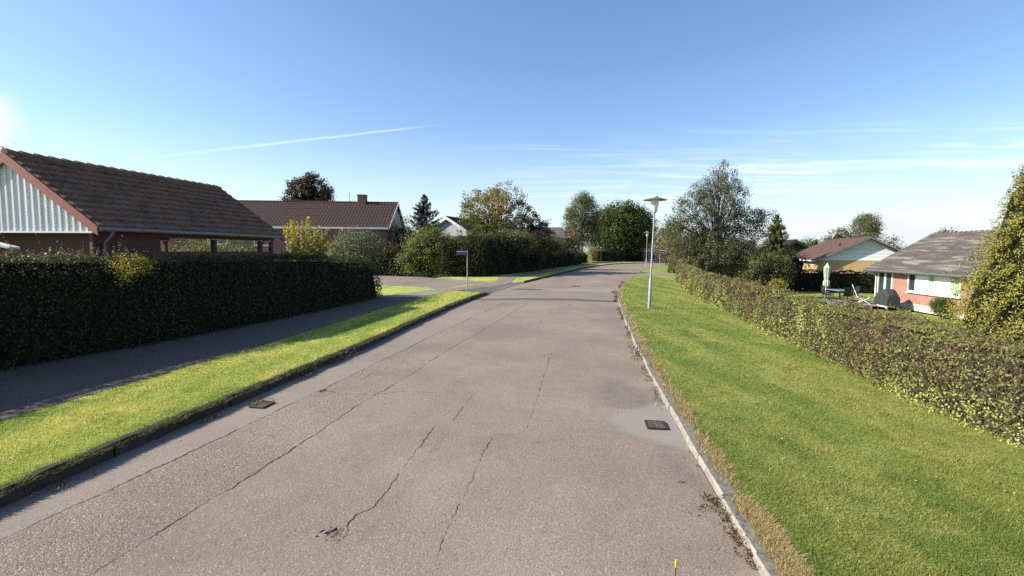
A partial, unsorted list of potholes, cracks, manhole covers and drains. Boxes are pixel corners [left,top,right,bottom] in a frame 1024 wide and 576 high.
crack [437,359,549,557]
pothole [317,525,350,541]
